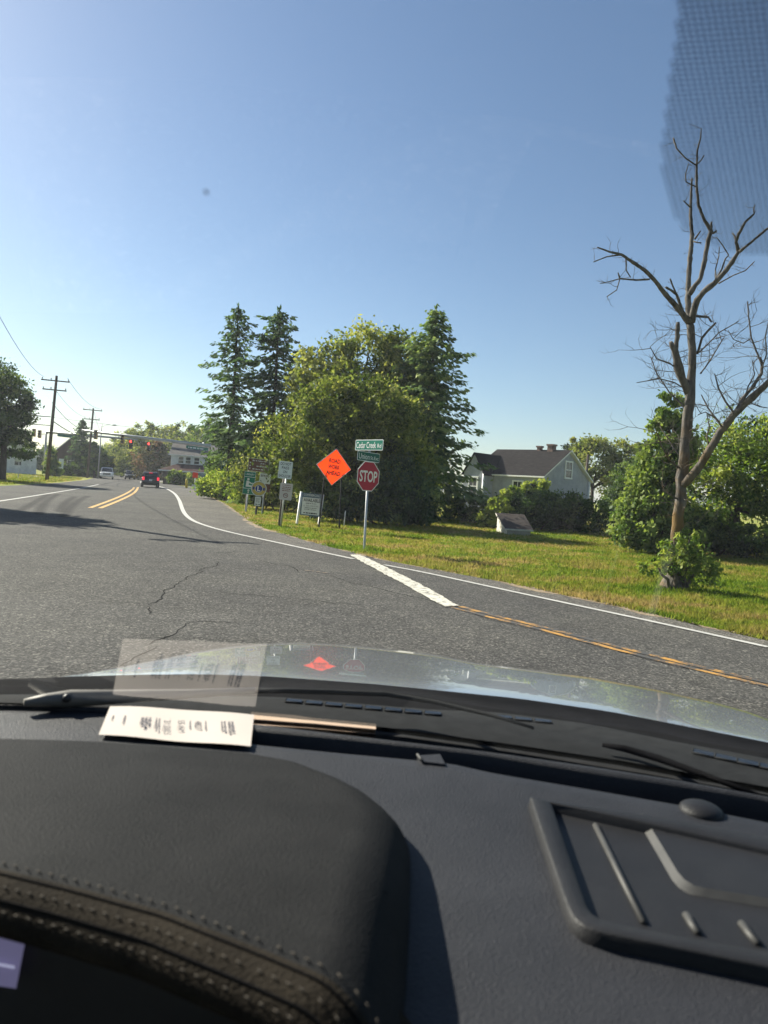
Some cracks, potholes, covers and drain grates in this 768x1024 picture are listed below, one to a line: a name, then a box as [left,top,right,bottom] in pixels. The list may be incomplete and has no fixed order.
crack [120,621,234,666]
